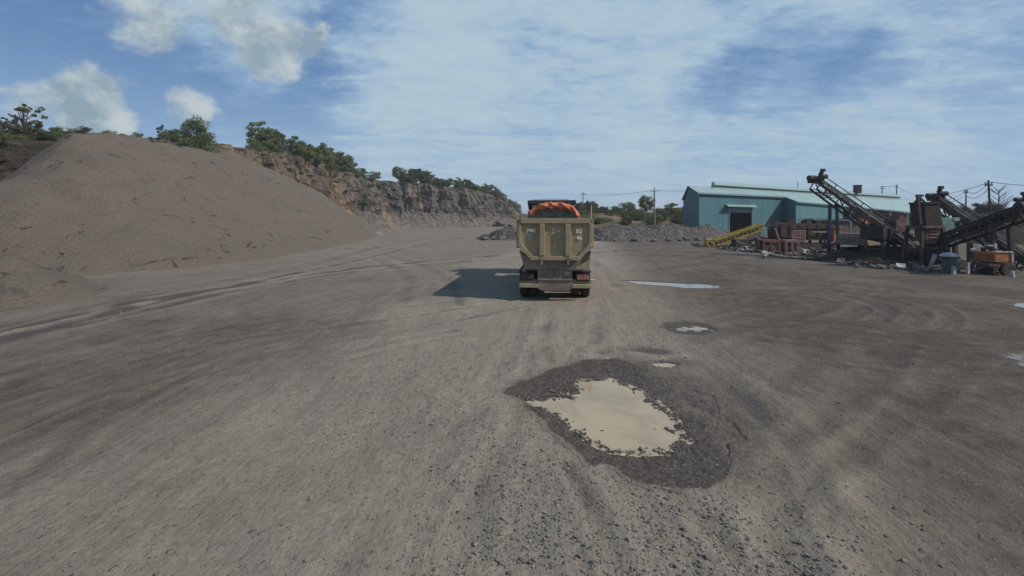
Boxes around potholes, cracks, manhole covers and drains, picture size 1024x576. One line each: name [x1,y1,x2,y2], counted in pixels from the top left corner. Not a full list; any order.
pothole [659,321,720,335]
pothole [494,357,754,496]
